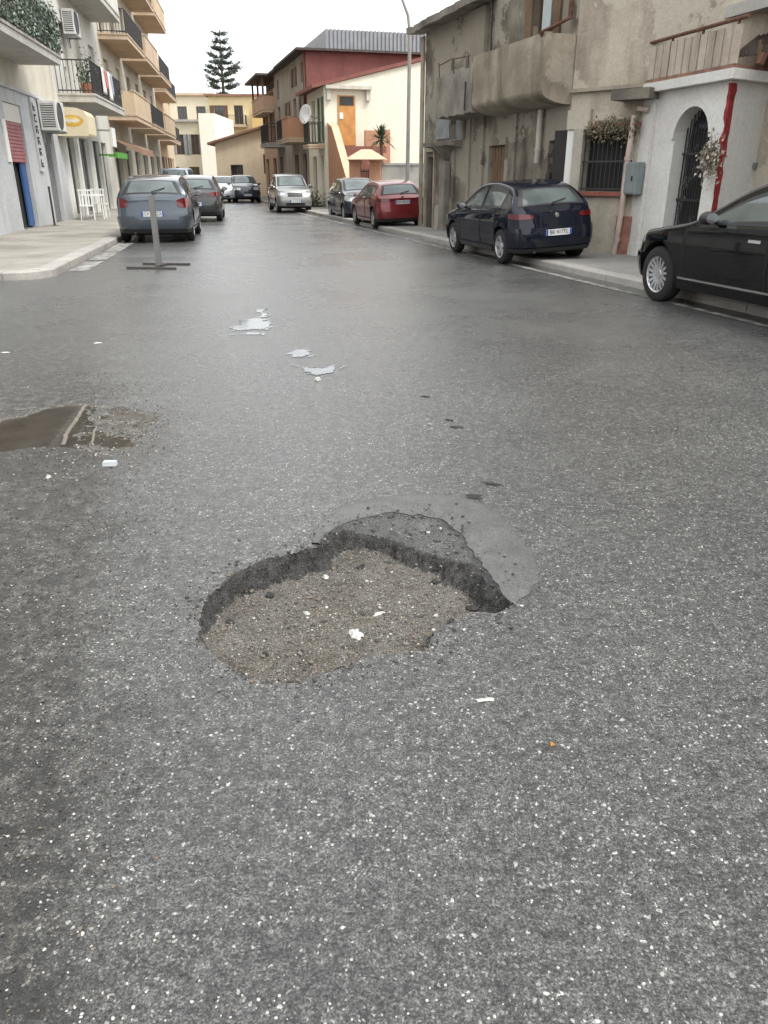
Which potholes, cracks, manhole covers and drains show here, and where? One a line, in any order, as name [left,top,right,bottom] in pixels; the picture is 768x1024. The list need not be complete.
pothole [198,513,512,683]
pothole [0,403,163,455]
